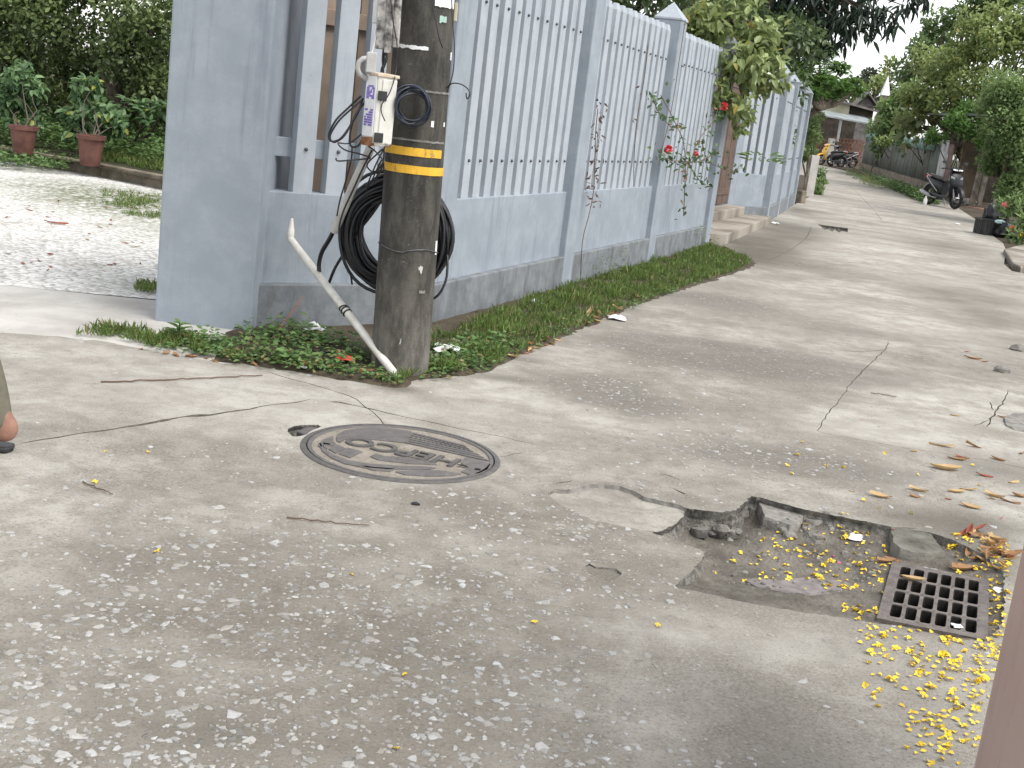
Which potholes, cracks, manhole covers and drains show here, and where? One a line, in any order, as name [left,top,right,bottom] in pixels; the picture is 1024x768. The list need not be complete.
crack [974,392,1008,426]
manhole cover [296,424,500,484]
drain grate [876,561,989,641]
pothole [818,224,848,232]
crack [20,371,533,444]
pothole [287,425,321,436]
pothole [654,496,1006,642]
